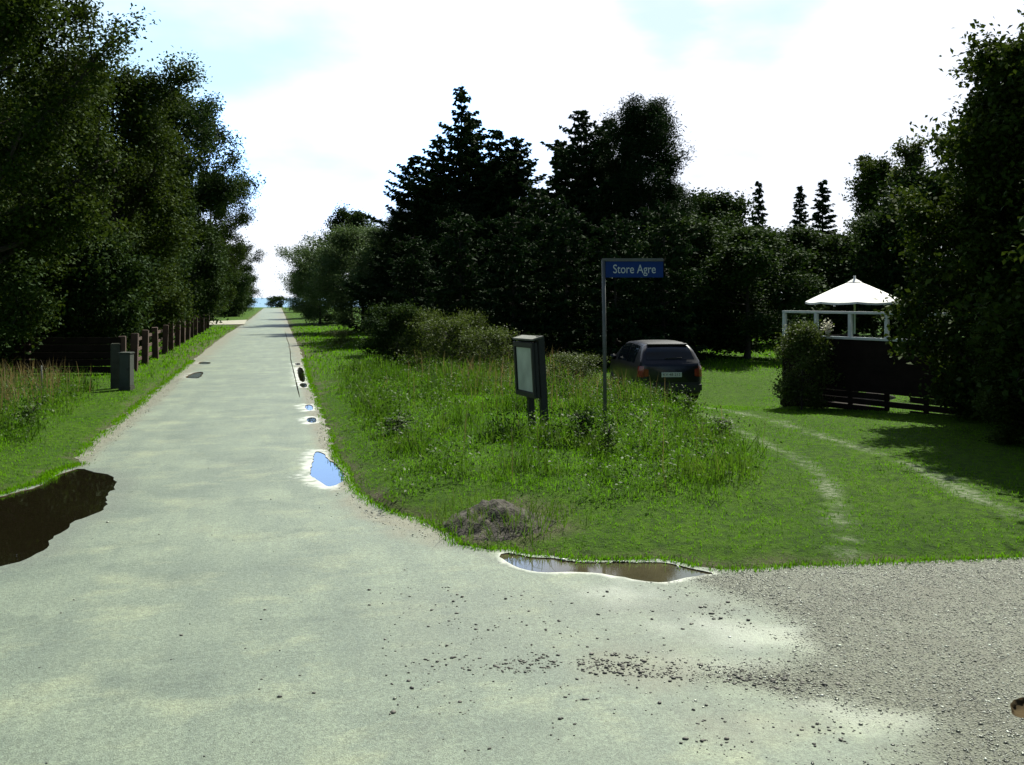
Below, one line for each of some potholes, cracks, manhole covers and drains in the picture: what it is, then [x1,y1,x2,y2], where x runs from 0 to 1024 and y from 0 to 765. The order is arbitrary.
pothole [310,451,345,486]
pothole [0,469,117,566]
pothole [1010,697,1024,718]
crack [285,333,300,397]
pothole [499,553,713,582]
